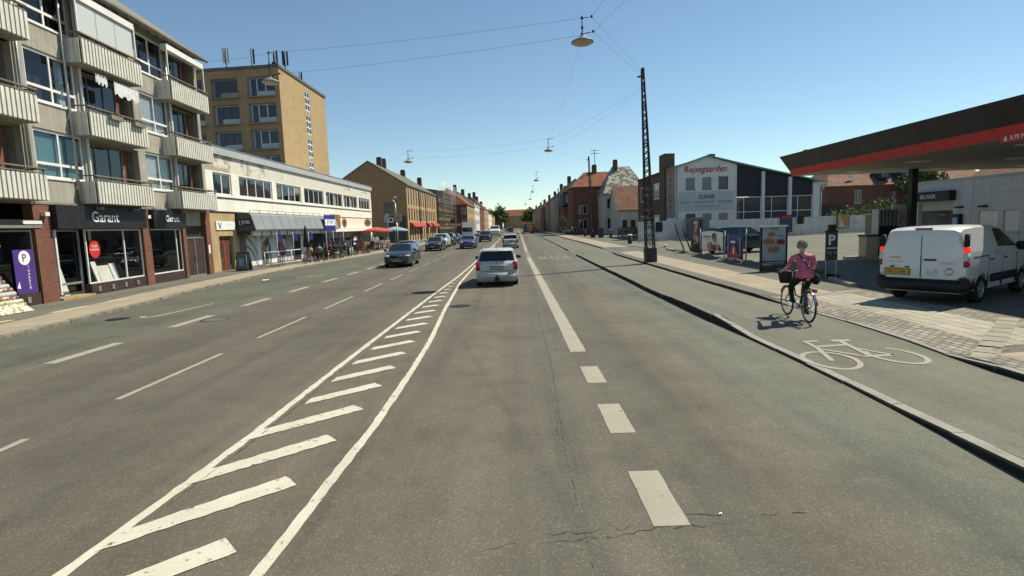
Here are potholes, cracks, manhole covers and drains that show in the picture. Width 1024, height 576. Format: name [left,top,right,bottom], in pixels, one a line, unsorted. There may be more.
crack [492,512,806,549]
